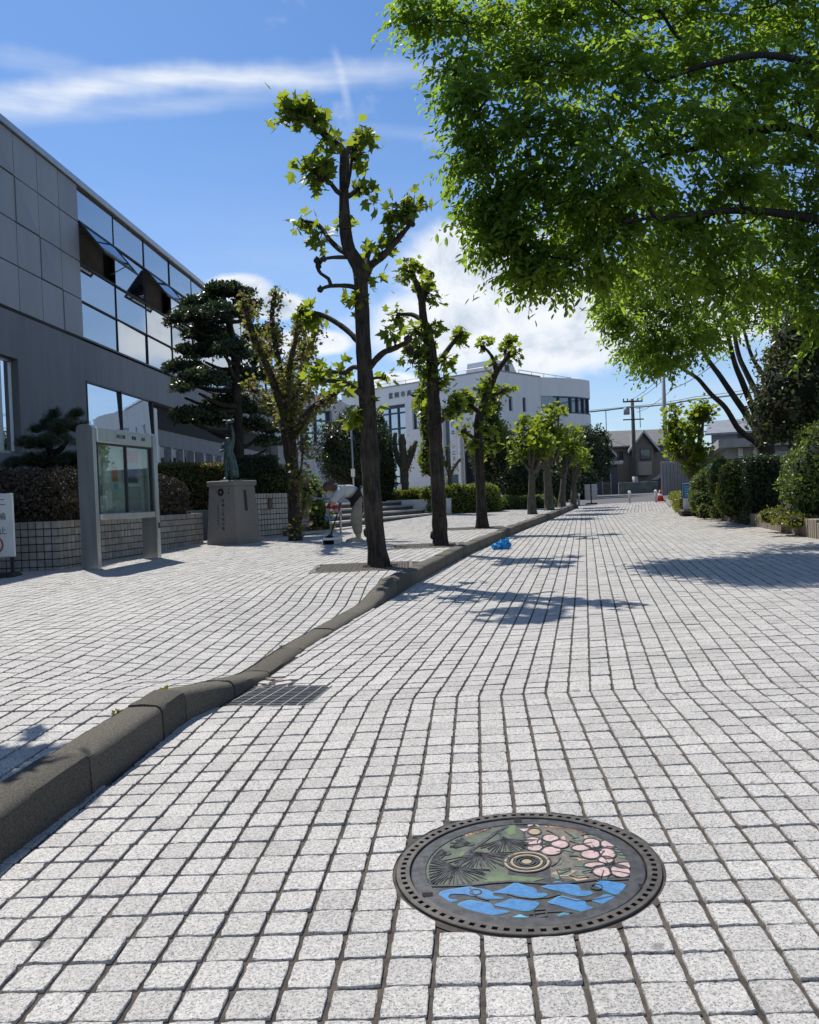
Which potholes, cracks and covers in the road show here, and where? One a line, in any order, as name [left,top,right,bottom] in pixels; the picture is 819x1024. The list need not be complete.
drain grate [219,686,332,707]
manhole cover [393,812,667,943]
